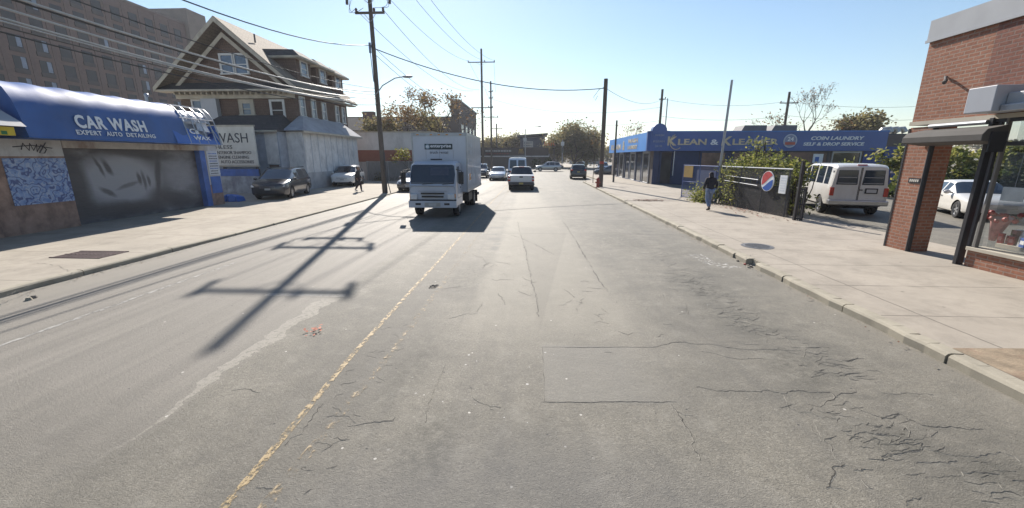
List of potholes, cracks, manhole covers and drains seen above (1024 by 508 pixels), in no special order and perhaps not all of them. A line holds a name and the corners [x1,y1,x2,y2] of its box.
crack [444,208,1024,504]
crack [284,284,423,471]
drain grate [49,250,129,259]
